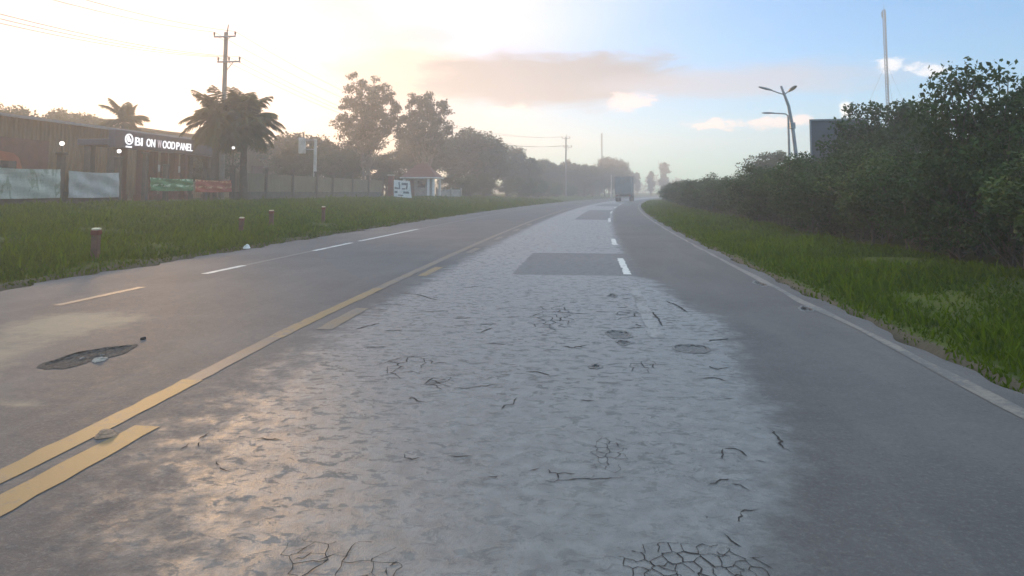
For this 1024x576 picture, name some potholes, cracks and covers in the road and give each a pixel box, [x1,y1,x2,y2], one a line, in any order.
pothole [672,344,712,353]
pothole [37,344,138,370]
crack [528,438,628,482]
crack [385,356,508,402]
crack [280,539,402,576]
pothole [604,330,634,339]
crack [620,509,772,576]
crack [500,294,687,335]
crack [721,430,790,462]
